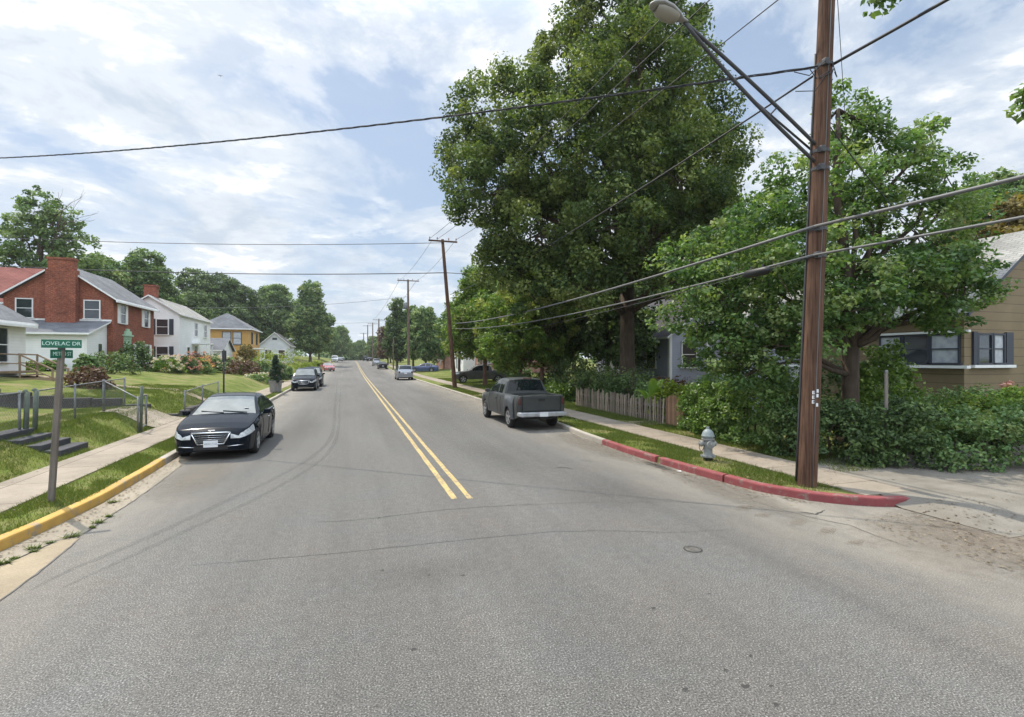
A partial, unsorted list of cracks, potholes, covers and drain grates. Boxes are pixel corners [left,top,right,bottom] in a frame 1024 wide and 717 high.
crack [684,478,912,548]
crack [186,529,733,566]
crack [324,501,715,522]
